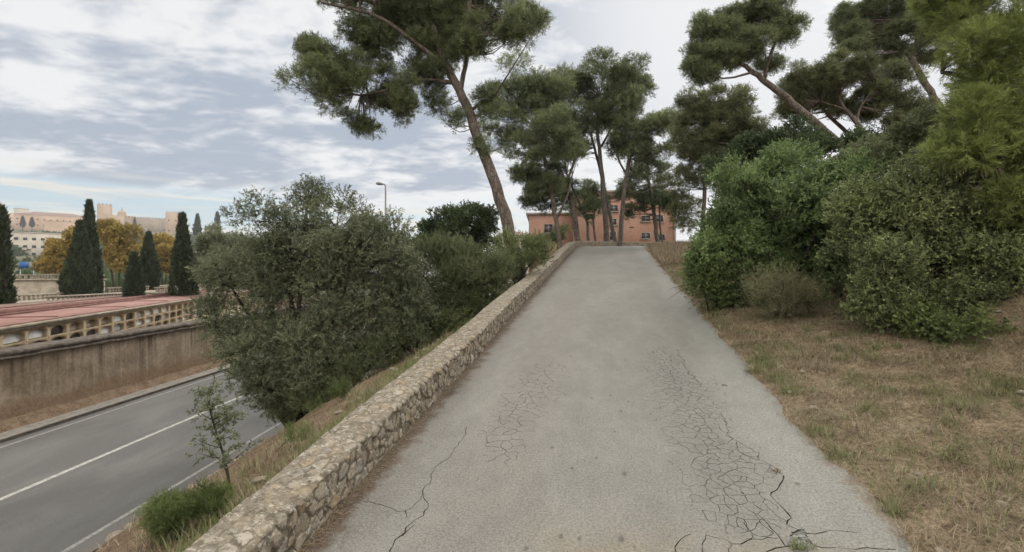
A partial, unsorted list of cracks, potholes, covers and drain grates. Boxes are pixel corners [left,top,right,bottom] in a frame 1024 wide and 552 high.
crack [641,346,896,552]
crack [363,427,467,552]
crack [478,366,563,467]
